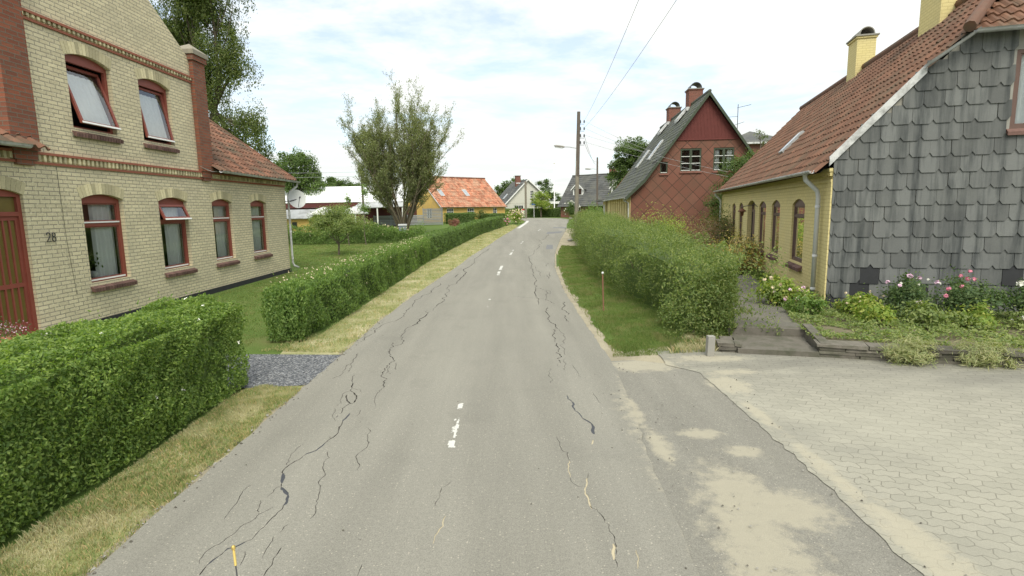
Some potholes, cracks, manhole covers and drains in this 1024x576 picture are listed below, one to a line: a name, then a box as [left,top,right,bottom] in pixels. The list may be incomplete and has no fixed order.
crack [557,439,618,567]
crack [363,248,490,406]
crack [199,354,371,575]
crack [517,237,567,383]
